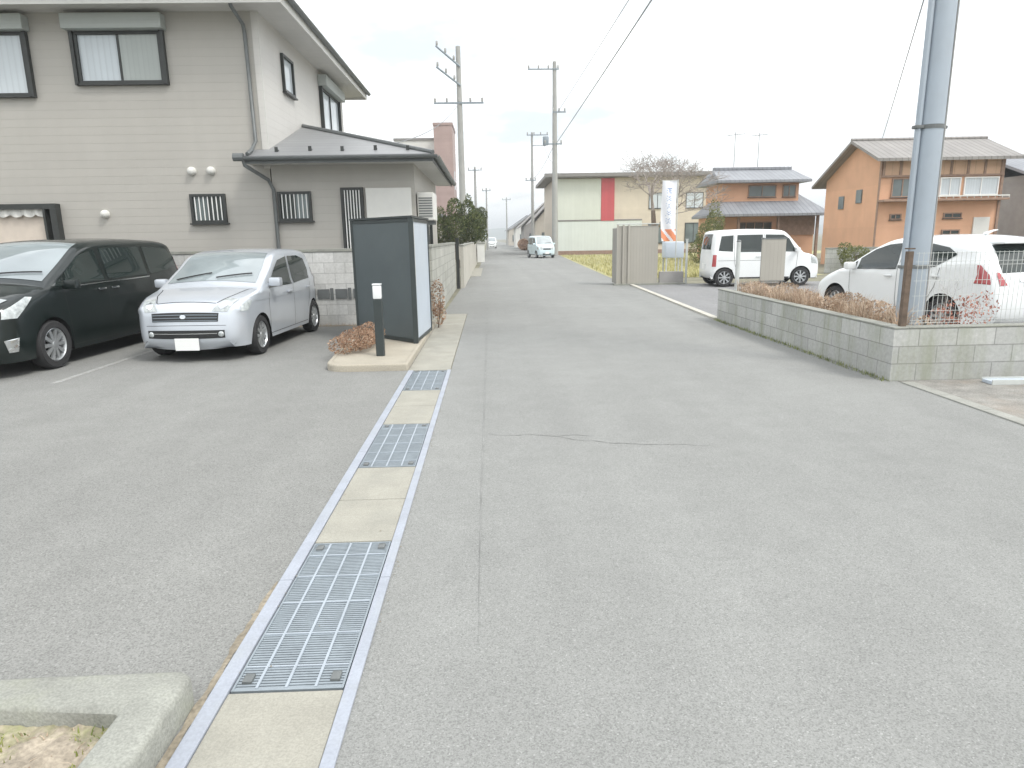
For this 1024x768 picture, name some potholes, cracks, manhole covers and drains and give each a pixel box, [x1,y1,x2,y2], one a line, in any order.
drain grate [403,370,447,391]
crack [478,298,712,643]
drain grate [359,423,429,468]
drain grate [231,541,391,694]
